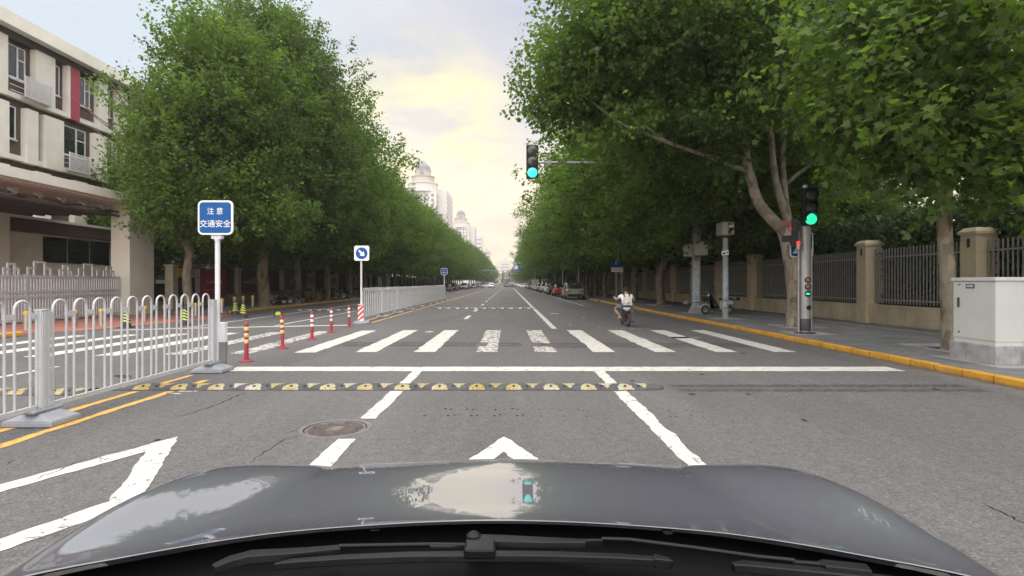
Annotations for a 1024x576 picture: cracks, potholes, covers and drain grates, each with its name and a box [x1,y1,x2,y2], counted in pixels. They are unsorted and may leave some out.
manhole cover [298,419,372,438]
